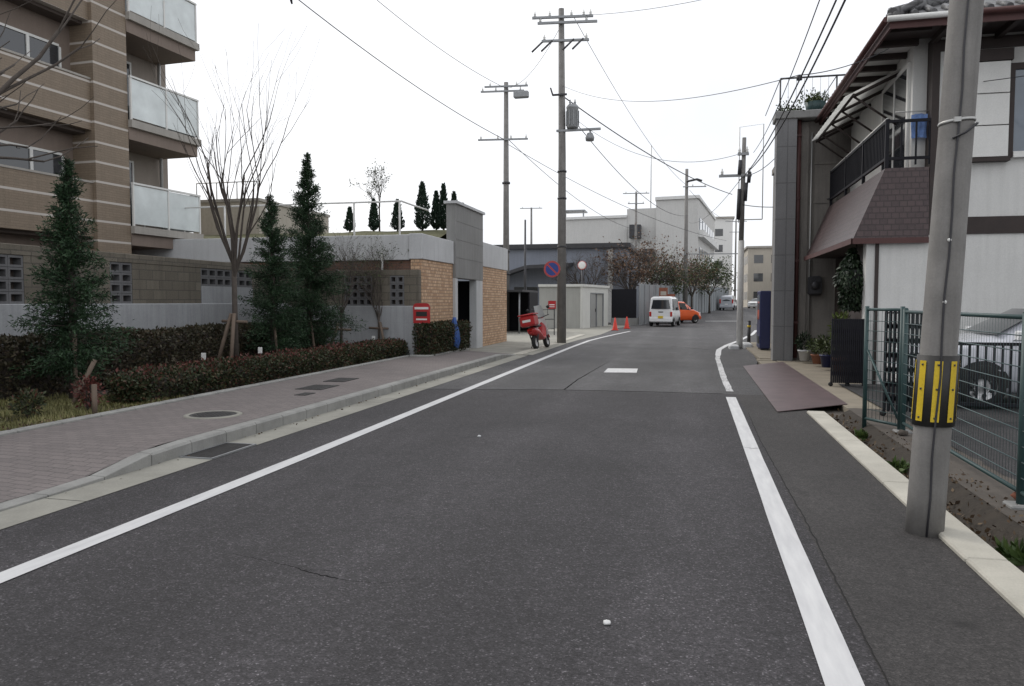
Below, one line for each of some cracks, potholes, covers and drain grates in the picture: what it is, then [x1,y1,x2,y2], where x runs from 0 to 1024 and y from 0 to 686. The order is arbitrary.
manhole cover [183,410,243,419]
drain grate [179,442,256,460]
crack [232,553,415,584]
